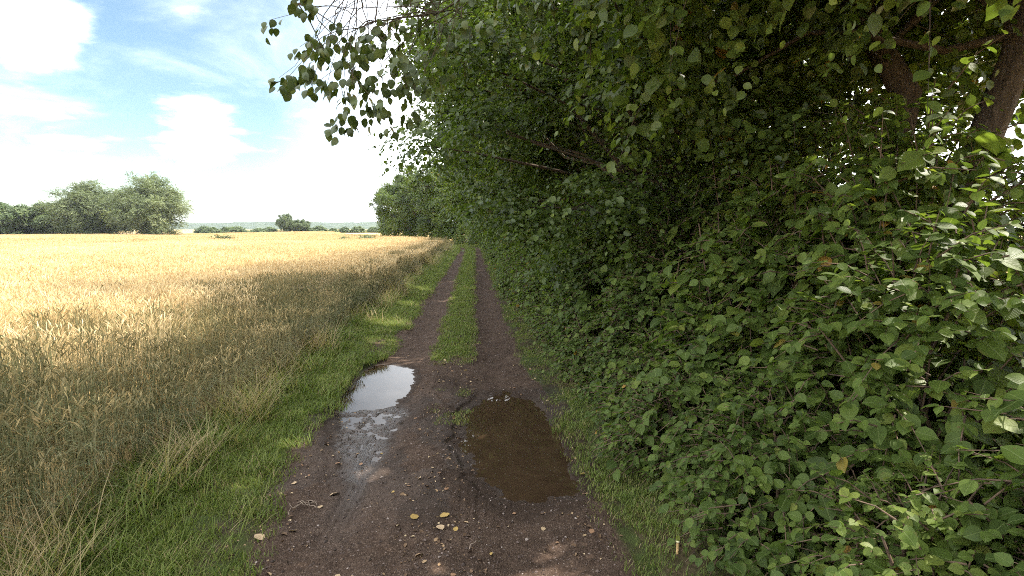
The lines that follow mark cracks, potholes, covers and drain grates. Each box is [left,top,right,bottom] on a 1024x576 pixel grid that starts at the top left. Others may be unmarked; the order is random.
pothole [440,391,599,514]
pothole [317,362,423,494]
